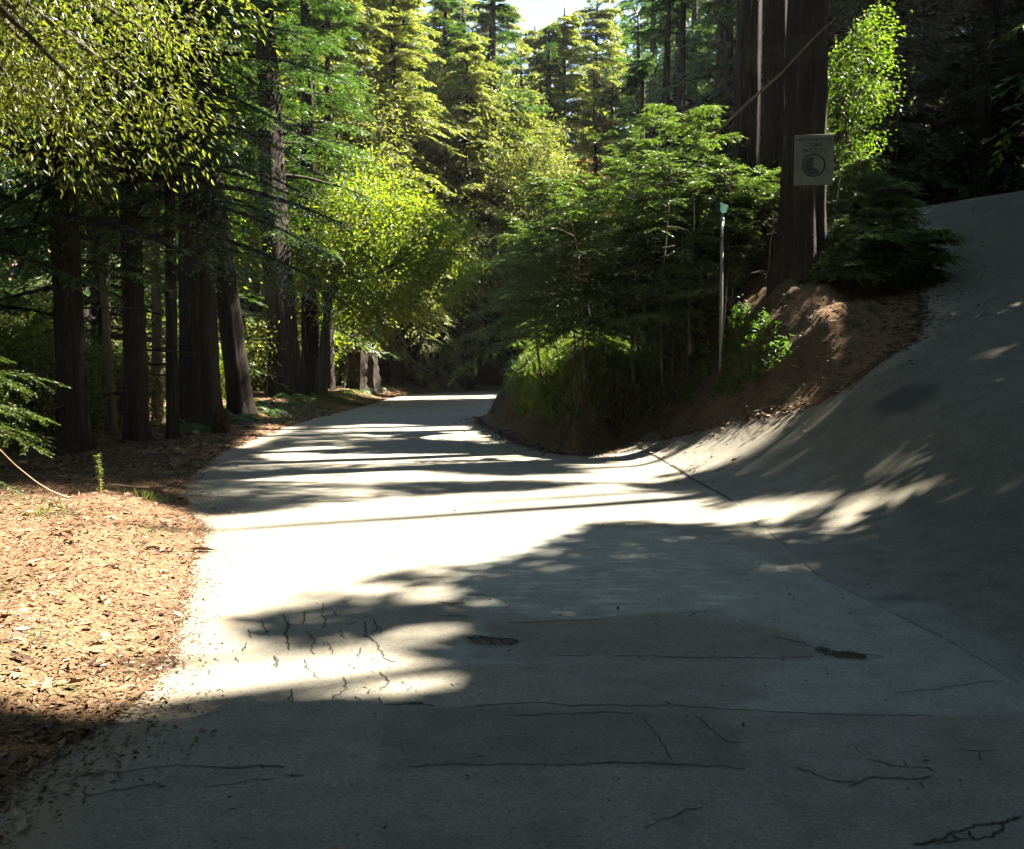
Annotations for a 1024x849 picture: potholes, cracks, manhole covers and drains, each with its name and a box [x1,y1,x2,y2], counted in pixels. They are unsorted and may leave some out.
crack [64,764,304,803]
crack [407,702,931,769]
pothole [803,644,884,660]
crack [912,816,1021,845]
crack [161,601,434,708]
crack [796,759,936,787]
pothole [462,634,529,646]
crack [644,807,701,828]
